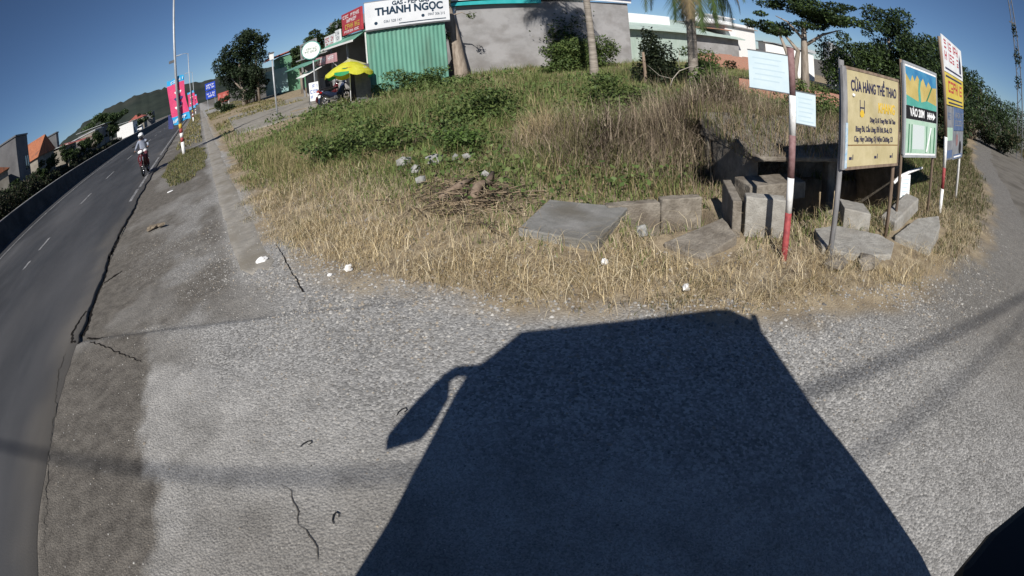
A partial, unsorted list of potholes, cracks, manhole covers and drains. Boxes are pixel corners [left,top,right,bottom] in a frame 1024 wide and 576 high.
crack [71,208,141,362]
crack [281,484,318,560]
crack [276,245,304,292]
